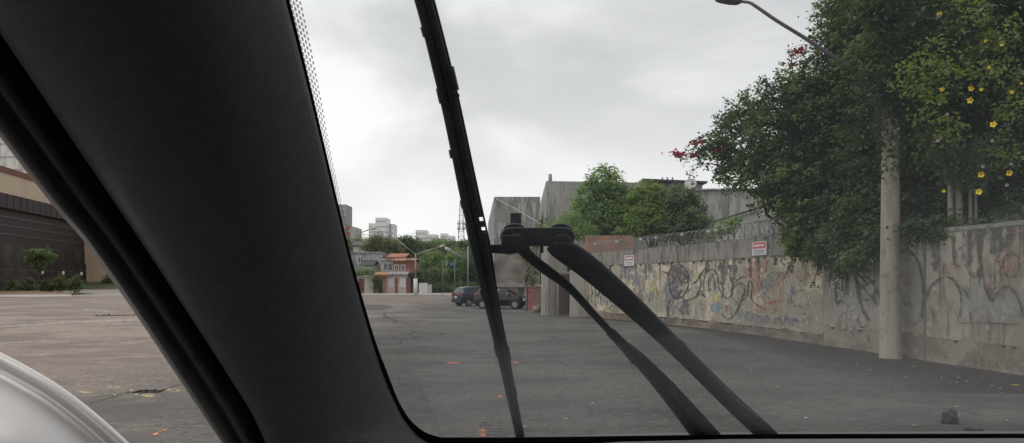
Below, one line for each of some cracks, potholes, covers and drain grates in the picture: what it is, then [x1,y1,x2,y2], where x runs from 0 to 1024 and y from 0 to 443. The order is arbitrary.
crack [383,314,445,343]
